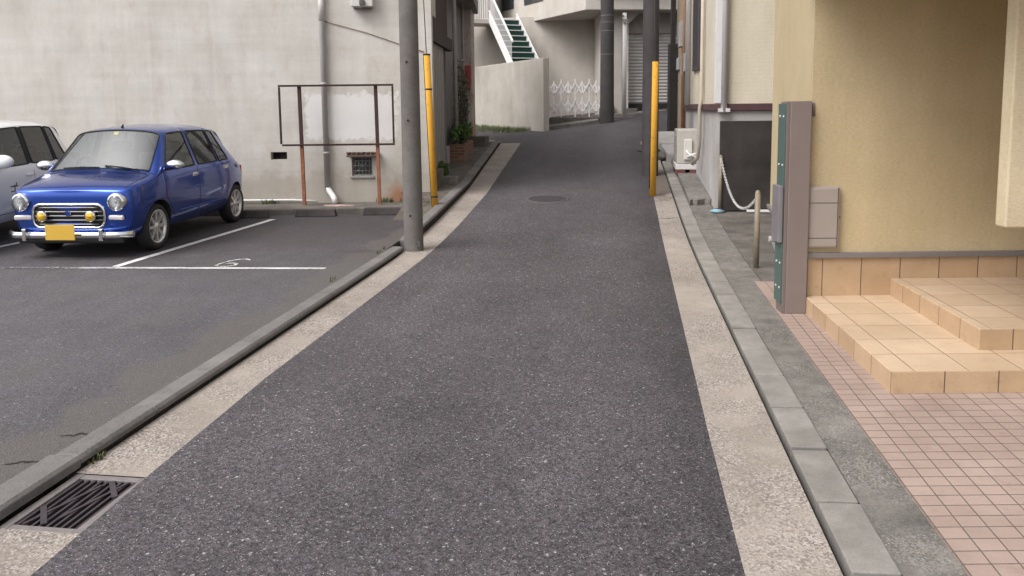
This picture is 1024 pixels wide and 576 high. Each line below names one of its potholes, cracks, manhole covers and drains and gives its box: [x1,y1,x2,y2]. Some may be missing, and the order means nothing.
drain grate [0,474,145,534]
manhole cover [527,195,569,203]
